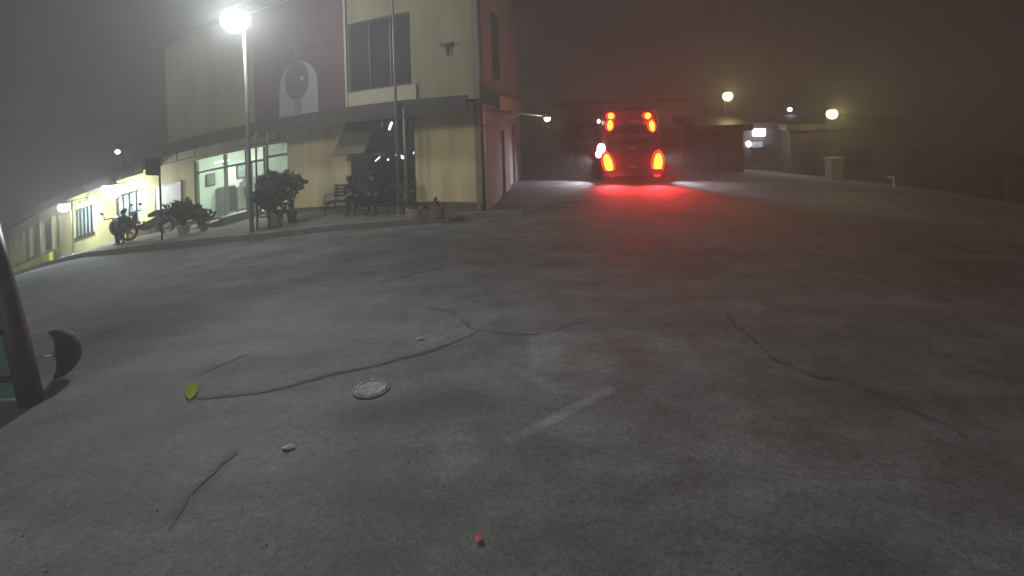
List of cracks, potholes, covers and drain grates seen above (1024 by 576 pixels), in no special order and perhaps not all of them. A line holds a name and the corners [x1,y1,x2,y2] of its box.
crack [168,452,239,531]
crack [193,303,586,400]
manhole cover [352,378,391,399]
crack [723,310,966,436]
